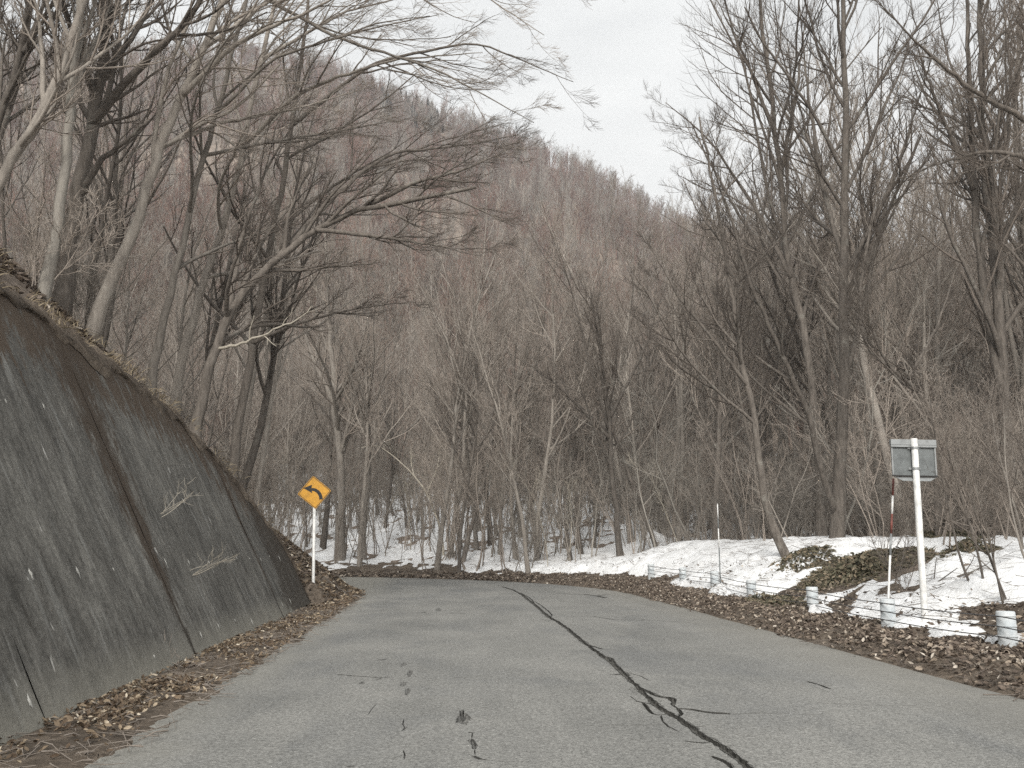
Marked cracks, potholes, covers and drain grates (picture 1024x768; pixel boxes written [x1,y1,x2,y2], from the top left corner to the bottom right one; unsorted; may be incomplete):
crack [467,587,754,768]
crack [785,681,924,715]
